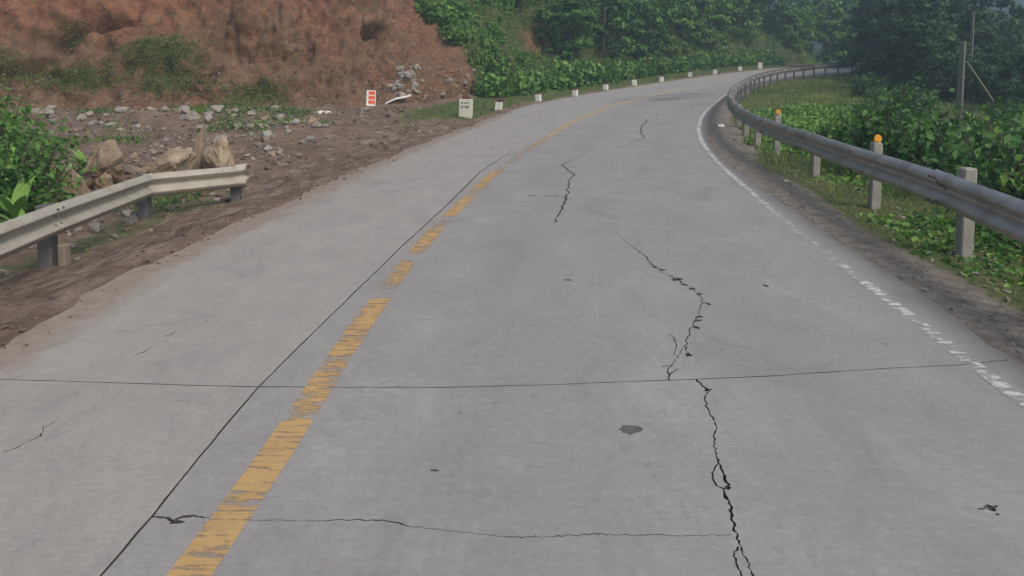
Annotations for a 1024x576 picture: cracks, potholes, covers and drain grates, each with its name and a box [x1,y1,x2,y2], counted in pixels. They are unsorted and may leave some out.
crack [153,379,755,576]
crack [528,150,592,223]
crack [616,234,711,381]
